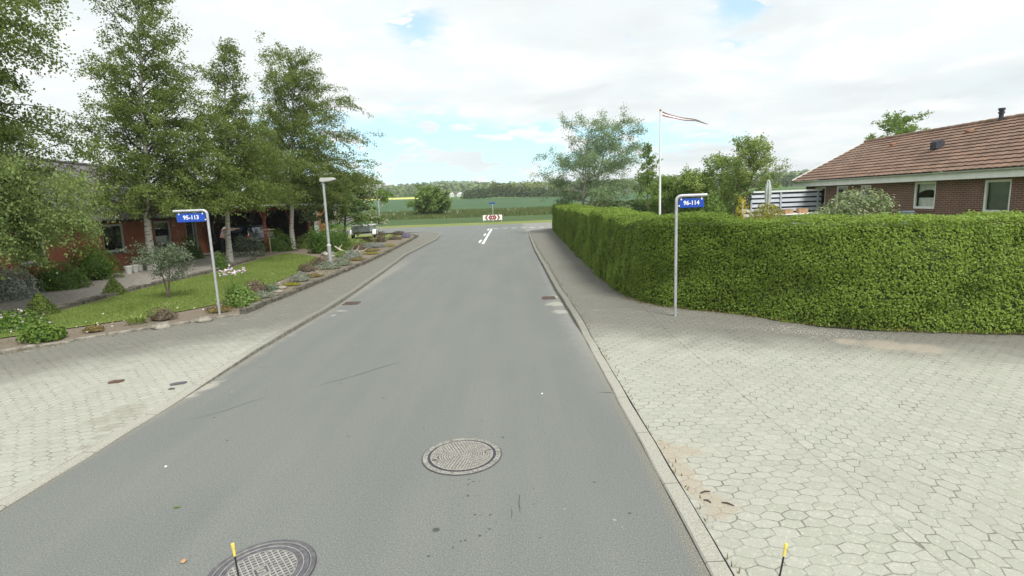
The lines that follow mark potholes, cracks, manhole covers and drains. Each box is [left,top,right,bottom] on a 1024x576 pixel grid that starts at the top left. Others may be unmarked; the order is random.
manhole cover [421,438,502,475]
manhole cover [208,539,317,576]
